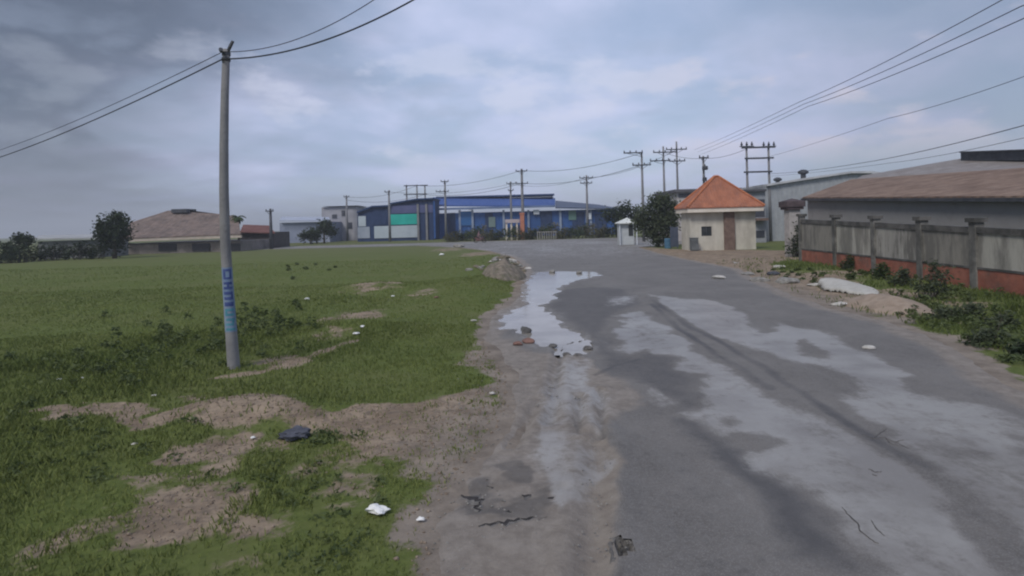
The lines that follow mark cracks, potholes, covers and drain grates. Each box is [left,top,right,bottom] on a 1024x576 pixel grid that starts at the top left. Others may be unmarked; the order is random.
crack [864,430,909,449]
crack [461,486,554,528]
pothole [608,536,636,564]
crack [842,507,885,544]
